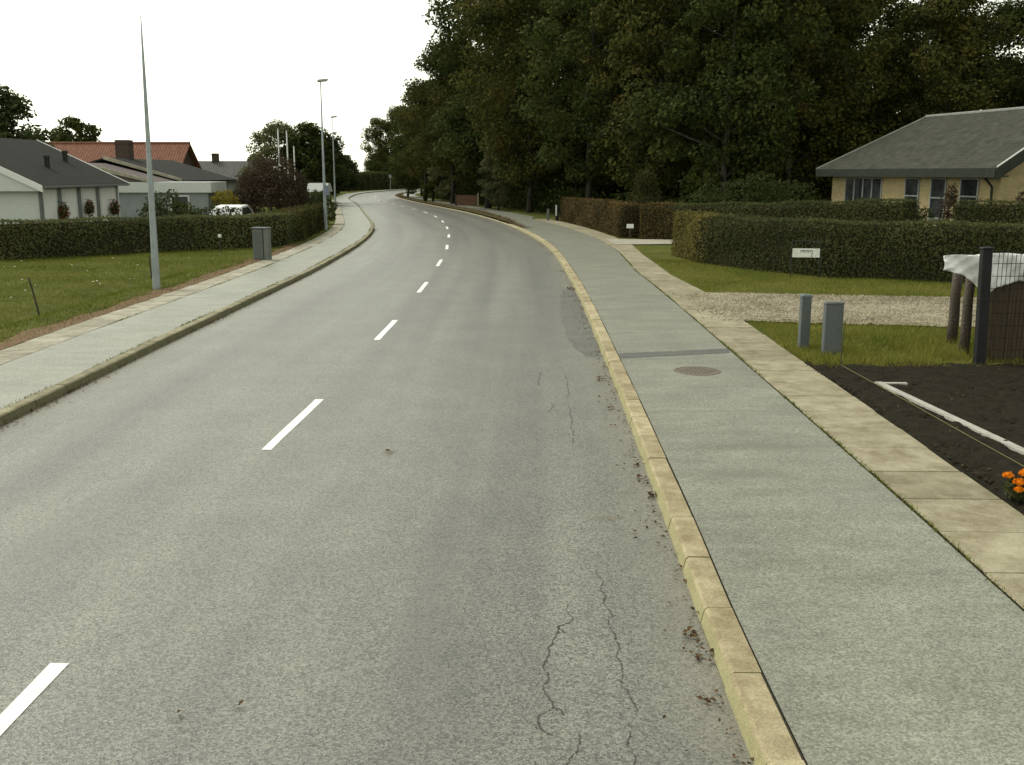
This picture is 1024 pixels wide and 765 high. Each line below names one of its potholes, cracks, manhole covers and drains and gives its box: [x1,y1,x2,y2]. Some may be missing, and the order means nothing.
crack [596,571,638,765]
crack [537,605,581,765]
crack [547,375,574,445]
manhole cover [673,366,721,376]
